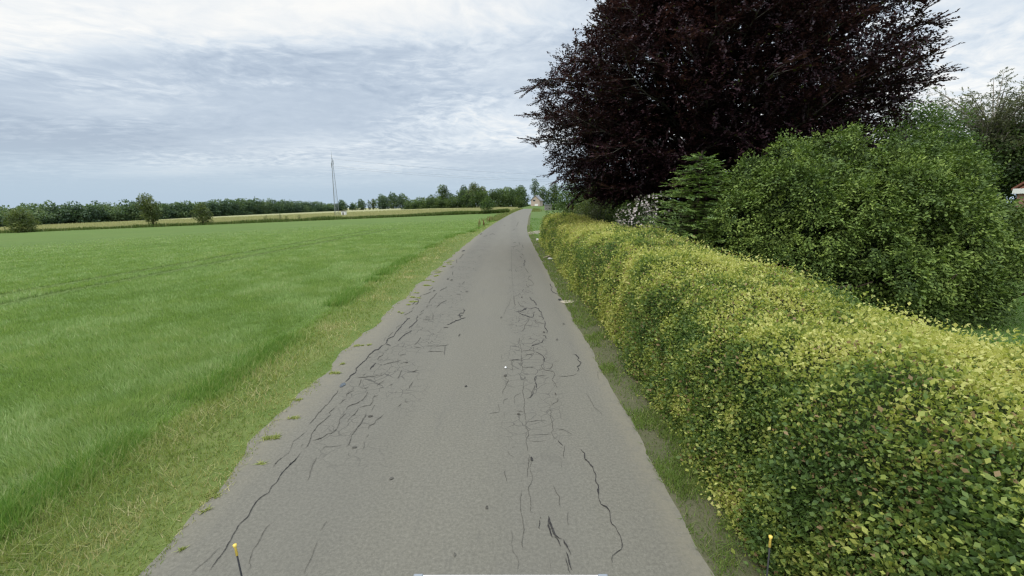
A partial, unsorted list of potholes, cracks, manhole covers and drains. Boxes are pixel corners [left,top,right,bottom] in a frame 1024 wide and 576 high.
crack [483,225,581,572]
crack [192,254,465,573]
crack [582,451,623,559]
